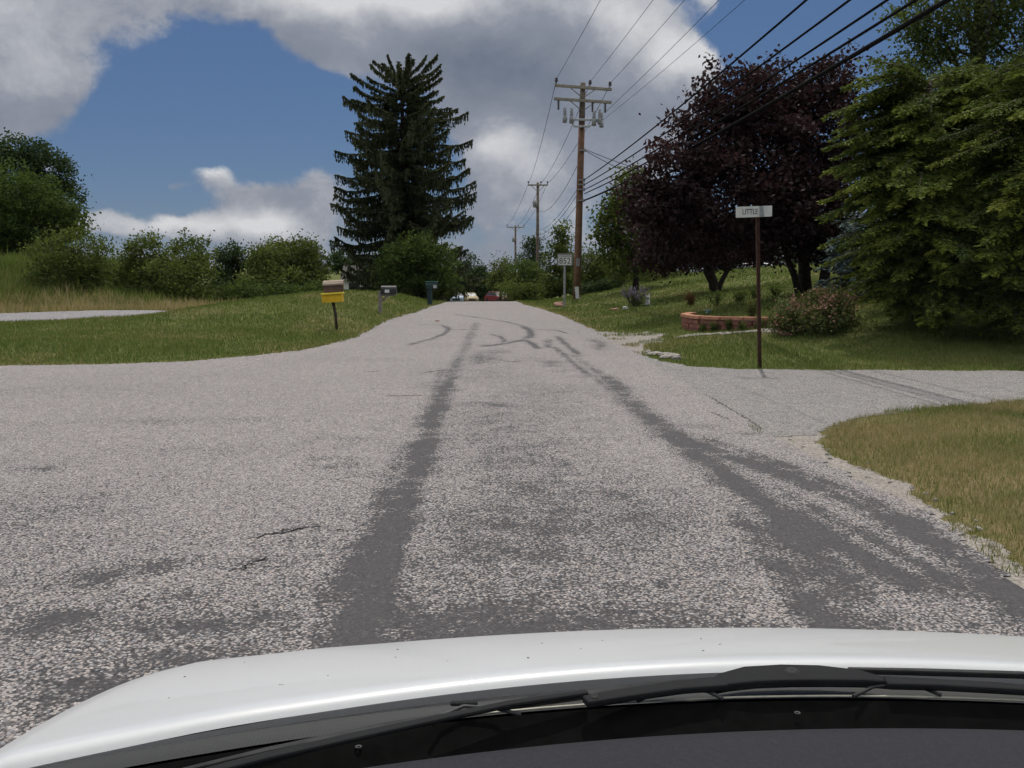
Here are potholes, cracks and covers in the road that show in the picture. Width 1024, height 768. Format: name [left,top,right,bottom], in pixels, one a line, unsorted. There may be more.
crack [229,526,357,571]
